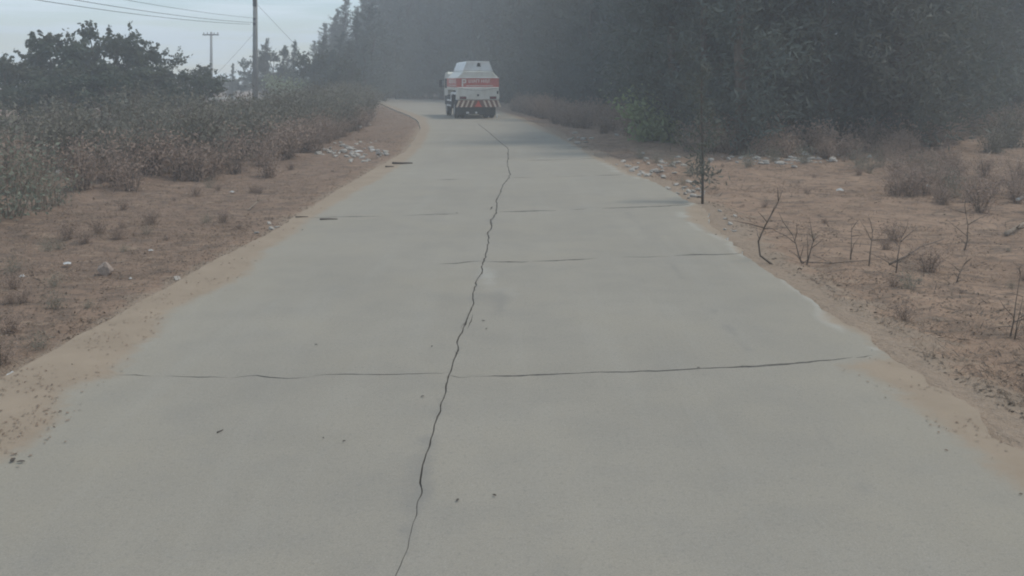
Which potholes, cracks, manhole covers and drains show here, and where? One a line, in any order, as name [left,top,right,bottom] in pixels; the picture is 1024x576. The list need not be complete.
crack [139,125,867,576]
